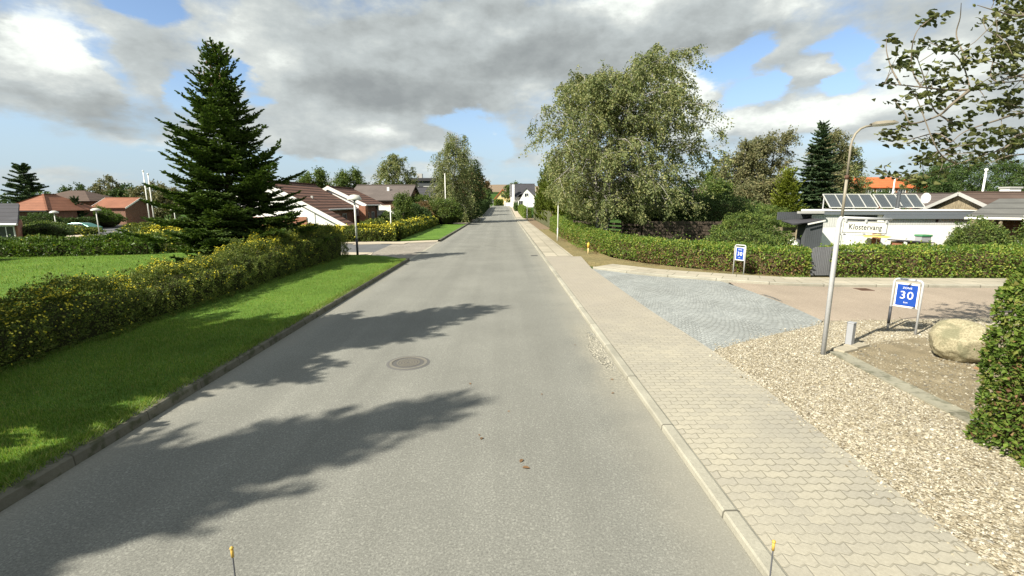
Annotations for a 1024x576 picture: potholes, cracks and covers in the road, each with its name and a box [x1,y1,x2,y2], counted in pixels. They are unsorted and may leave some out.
manhole cover [386,356,430,370]
pothole [587,331,616,371]
